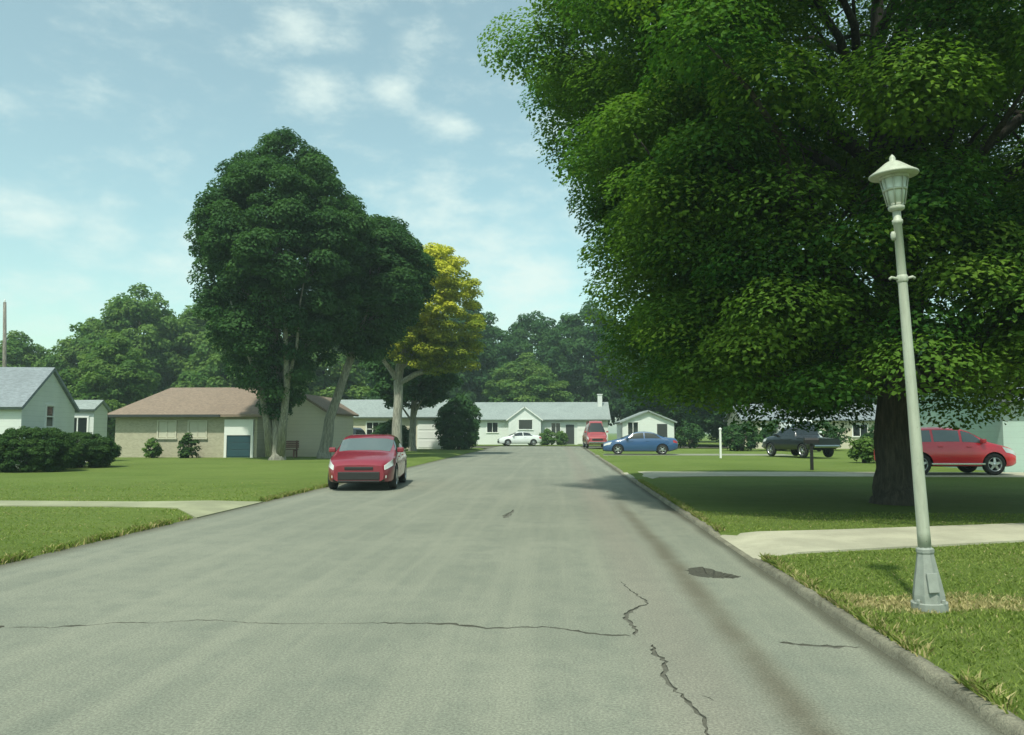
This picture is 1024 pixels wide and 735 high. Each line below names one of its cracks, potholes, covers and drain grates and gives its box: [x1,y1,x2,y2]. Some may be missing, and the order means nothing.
pothole [685,567,741,579]
crack [17,581,713,735]
crack [780,641,858,649]
